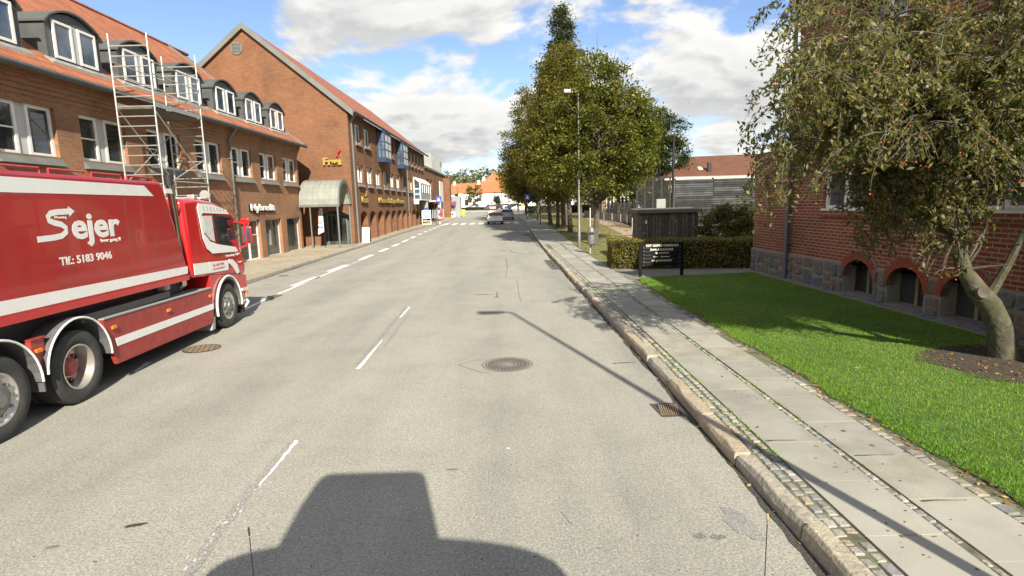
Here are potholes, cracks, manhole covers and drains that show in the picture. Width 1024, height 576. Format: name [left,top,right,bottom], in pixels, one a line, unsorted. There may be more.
crack [504,249,521,301]
drain grate [650,402,687,417]
manhole cover [482,357,533,372]
manhole cover [182,344,221,353]
